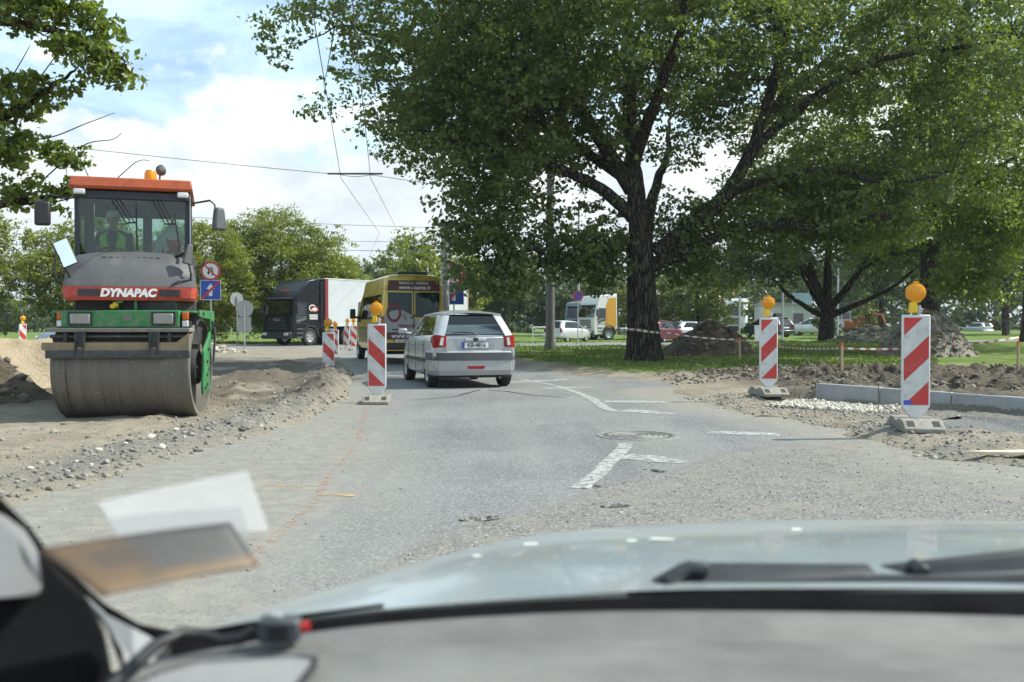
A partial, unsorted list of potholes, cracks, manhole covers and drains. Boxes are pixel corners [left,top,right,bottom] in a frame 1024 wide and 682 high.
crack [417,390,567,400]
manhole cover [596,430,680,441]
